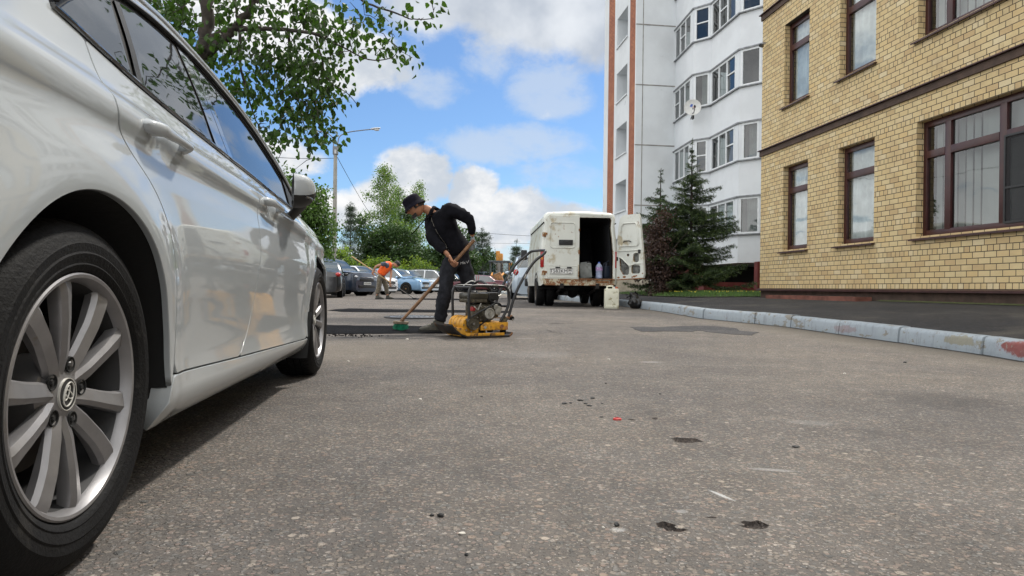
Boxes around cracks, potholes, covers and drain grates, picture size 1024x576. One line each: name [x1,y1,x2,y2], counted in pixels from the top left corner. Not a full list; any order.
pothole [656,521,687,532]
pothole [738,520,769,529]
